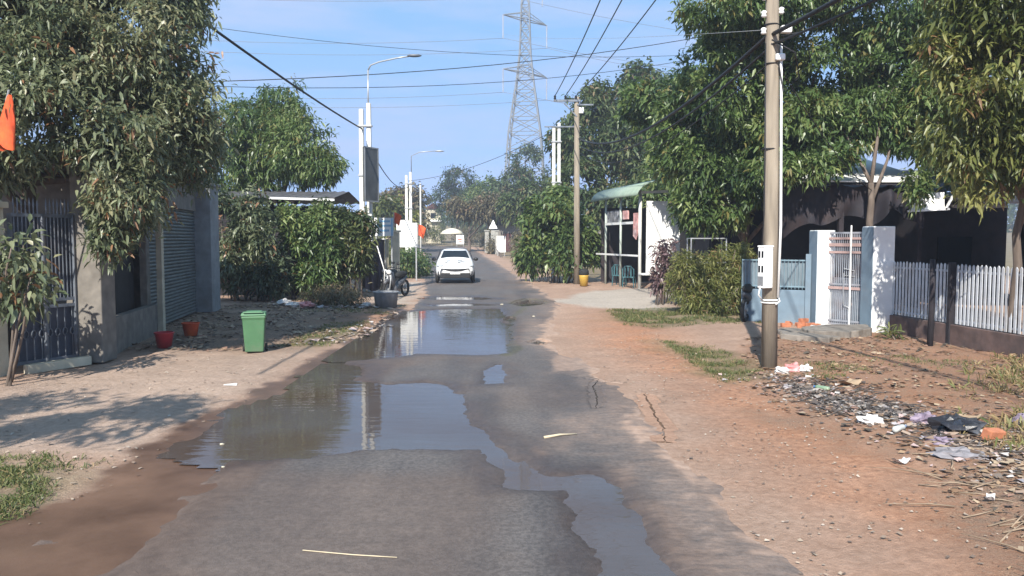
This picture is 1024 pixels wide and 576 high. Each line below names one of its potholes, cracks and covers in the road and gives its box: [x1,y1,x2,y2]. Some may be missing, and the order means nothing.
crack [573,376,678,443]
